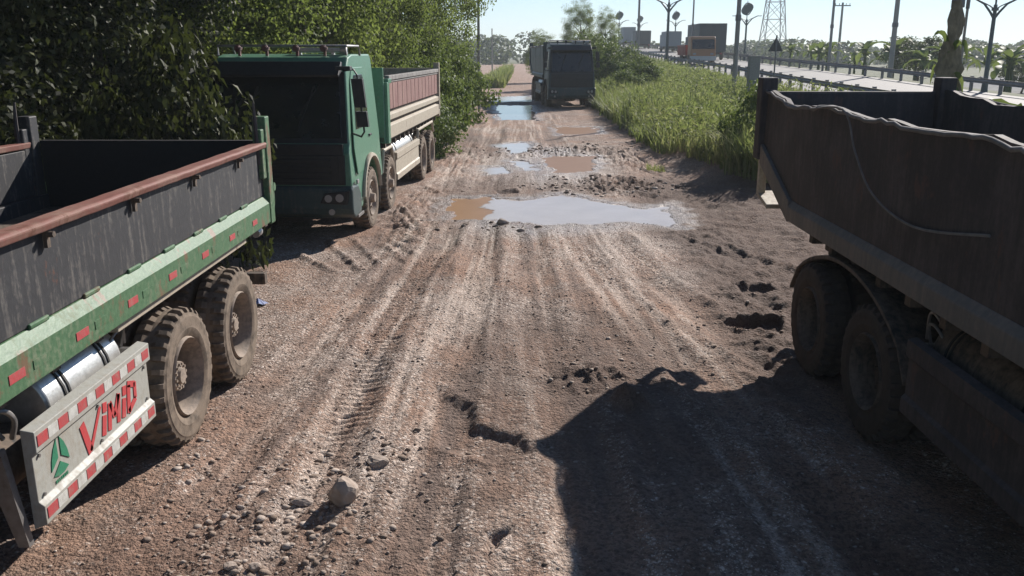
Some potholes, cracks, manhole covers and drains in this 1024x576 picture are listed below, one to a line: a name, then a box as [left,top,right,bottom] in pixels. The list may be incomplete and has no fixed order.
pothole [492,141,537,155]
pothole [491,104,540,121]
pothole [436,193,684,229]
pothole [479,165,511,174]
pothole [490,94,534,103]
pothole [722,312,787,332]
pothole [550,125,604,136]
pothole [505,160,548,171]
pothole [417,373,538,465]
pothole [539,153,603,174]
pothole [726,280,780,296]
